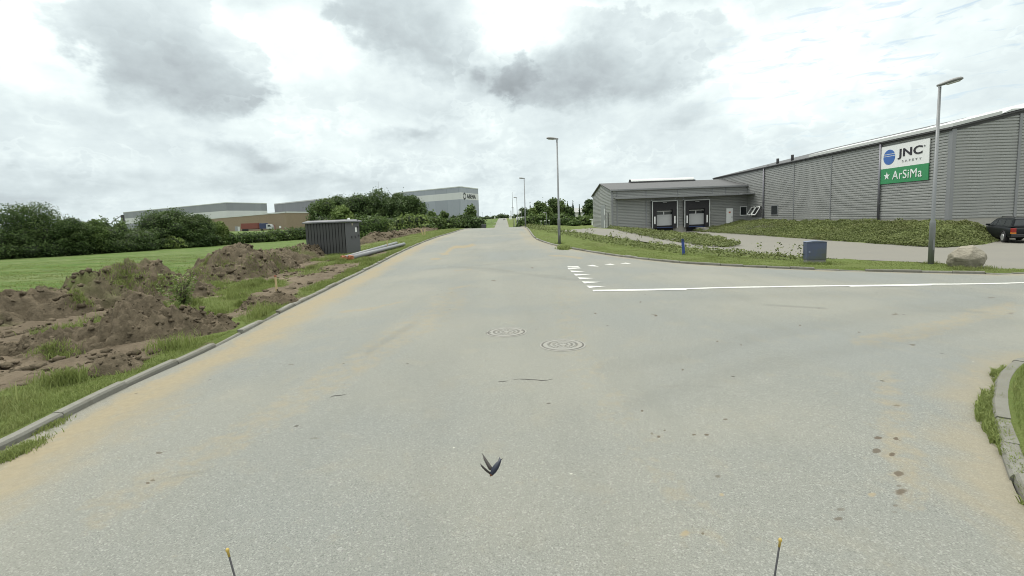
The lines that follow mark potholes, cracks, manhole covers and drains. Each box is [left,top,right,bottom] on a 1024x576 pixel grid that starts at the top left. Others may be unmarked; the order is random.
manhole cover [540,339,586,351]
manhole cover [486,327,527,337]
